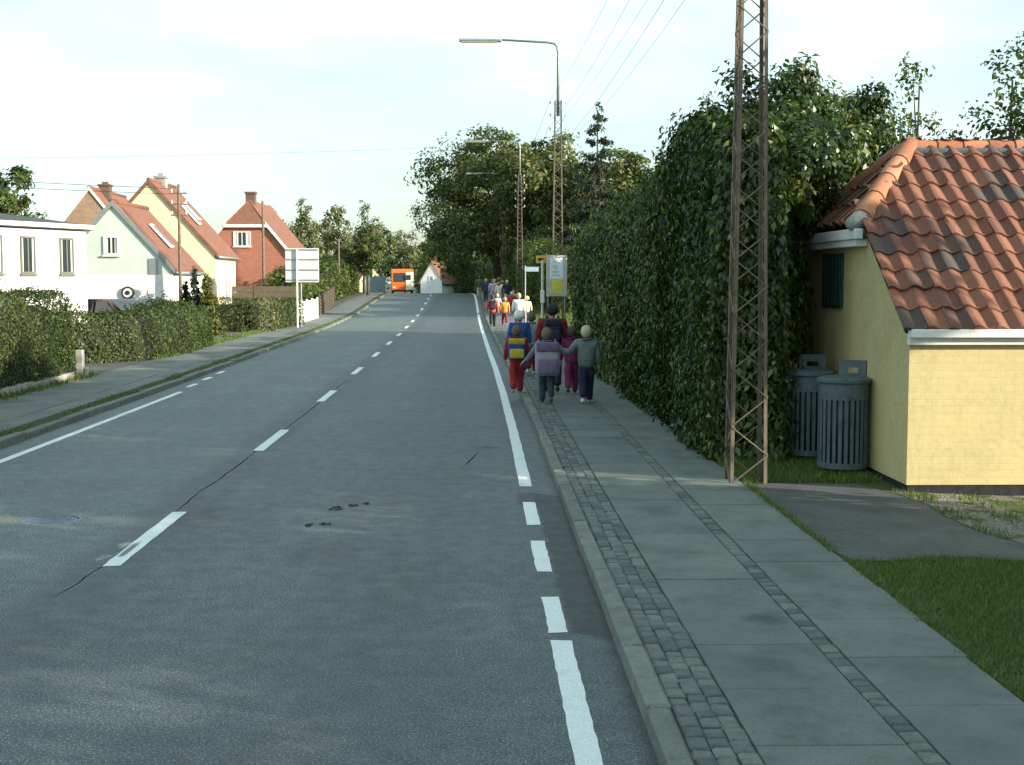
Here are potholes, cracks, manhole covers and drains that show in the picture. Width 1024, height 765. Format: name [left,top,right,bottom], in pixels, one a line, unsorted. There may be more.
manhole cover [22,515,82,525]
crack [49,380,348,600]
